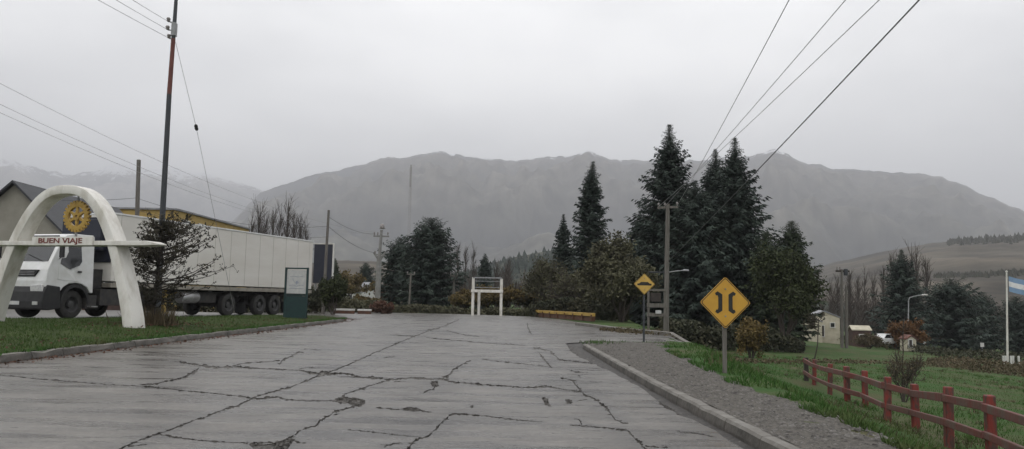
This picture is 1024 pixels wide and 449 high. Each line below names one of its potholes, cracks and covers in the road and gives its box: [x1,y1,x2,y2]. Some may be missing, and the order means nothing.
crack [2,323,714,449]
pothole [332,395,365,408]
